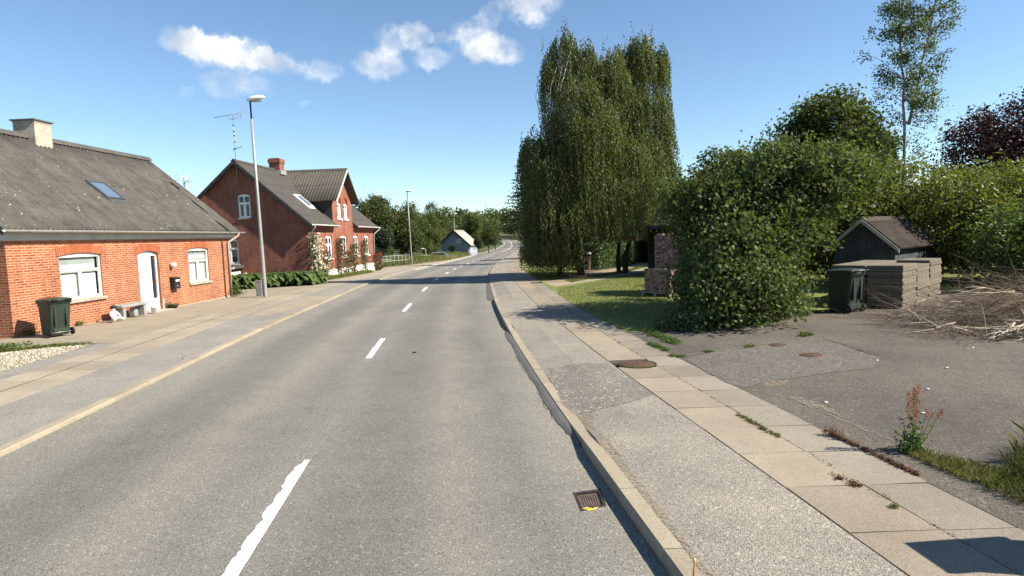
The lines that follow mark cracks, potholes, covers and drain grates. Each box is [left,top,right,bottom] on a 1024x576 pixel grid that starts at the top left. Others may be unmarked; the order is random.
manhole cover [618,360,657,368]
